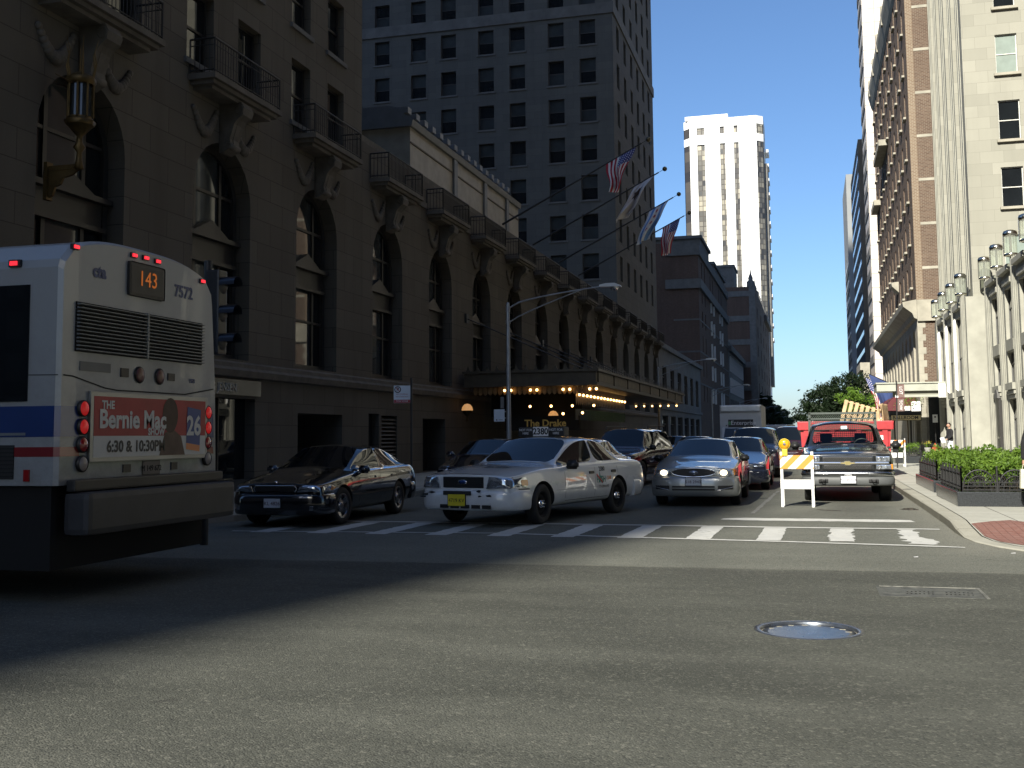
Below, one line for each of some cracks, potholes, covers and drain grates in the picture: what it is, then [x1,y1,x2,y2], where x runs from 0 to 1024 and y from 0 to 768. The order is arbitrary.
manhole cover [754,620,865,640]
